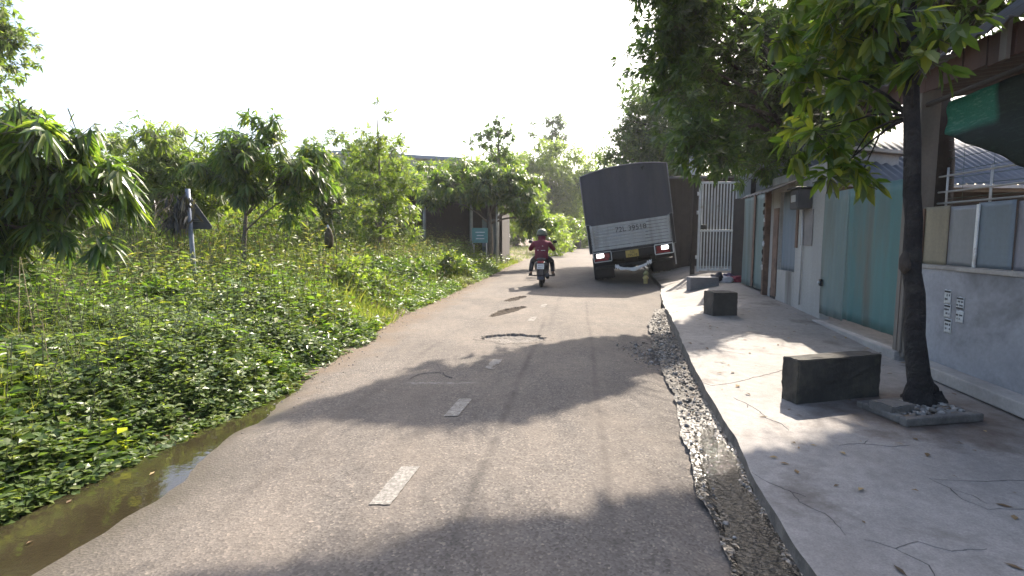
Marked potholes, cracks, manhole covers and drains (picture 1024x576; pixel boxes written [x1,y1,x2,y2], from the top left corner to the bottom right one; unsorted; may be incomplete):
crack [753,473,844,533]
pothole [498,295,531,304]
pothole [479,304,533,320]
pothole [472,332,554,345]
crack [864,539,985,576]
crack [929,478,1024,510]
